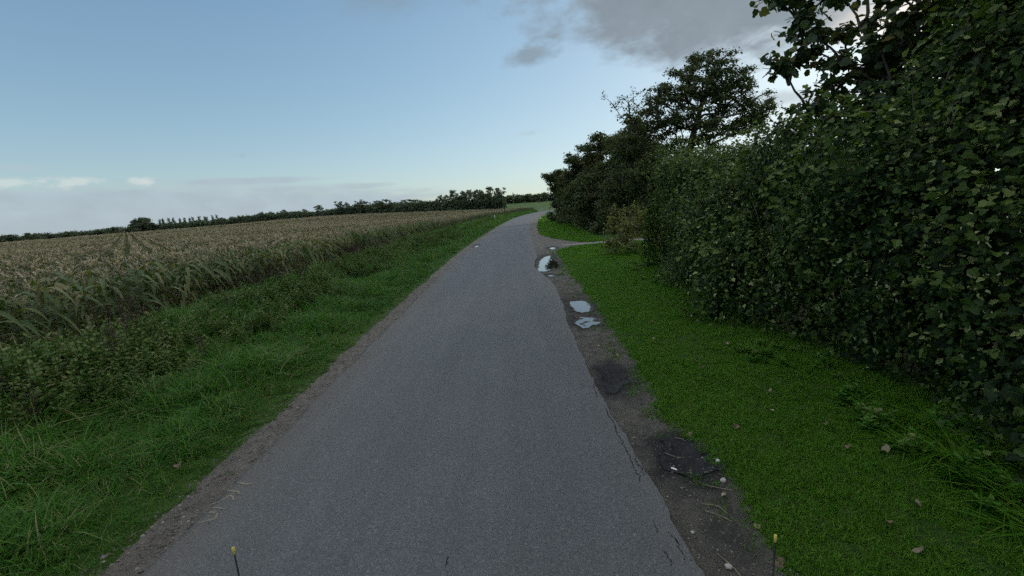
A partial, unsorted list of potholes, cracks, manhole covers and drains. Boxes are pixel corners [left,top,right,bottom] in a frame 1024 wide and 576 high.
pothole [573,314,606,329]
pothole [565,298,596,313]
crack [594,389,643,479]
pothole [600,365,631,393]
pothole [658,436,729,478]
